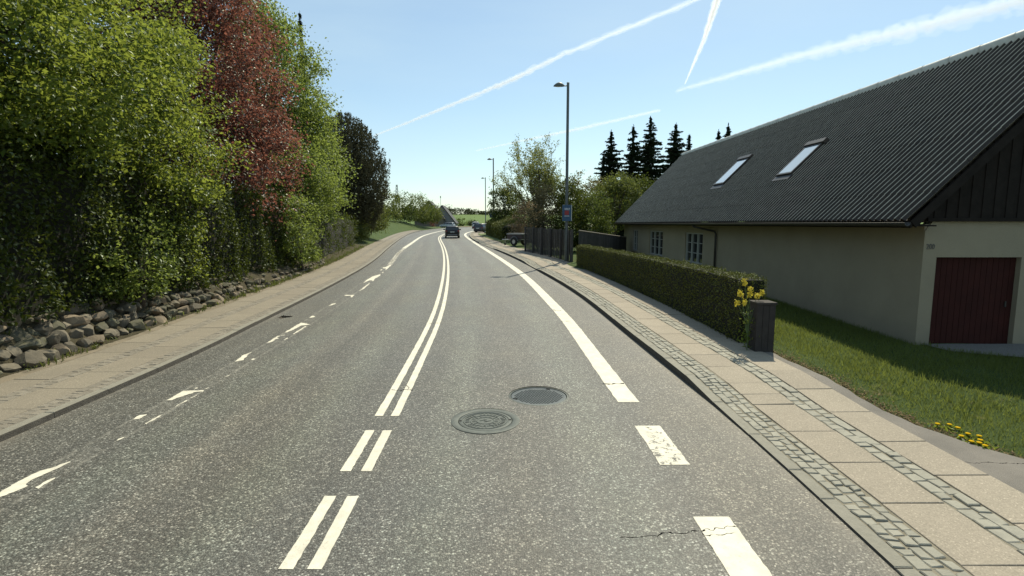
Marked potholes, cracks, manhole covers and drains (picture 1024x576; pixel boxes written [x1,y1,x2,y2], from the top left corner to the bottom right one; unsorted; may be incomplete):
manhole cover [509,387,569,406]
crack [620,526,735,542]
manhole cover [451,409,520,434]
